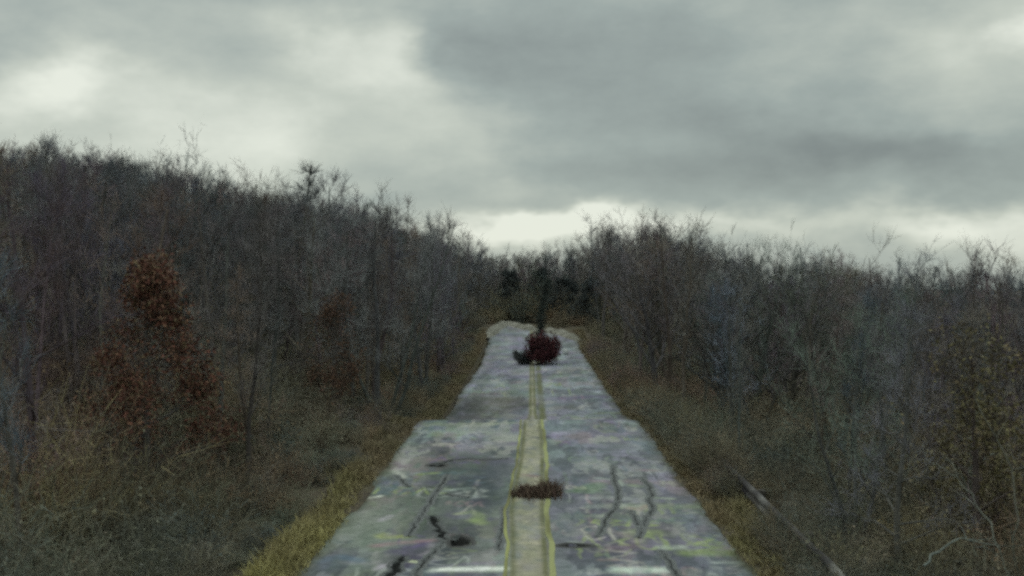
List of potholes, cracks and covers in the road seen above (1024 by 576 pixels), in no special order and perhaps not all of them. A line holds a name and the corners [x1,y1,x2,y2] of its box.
crack [380,458,506,576]
crack [594,465,684,576]
pothole [445,534,477,548]
